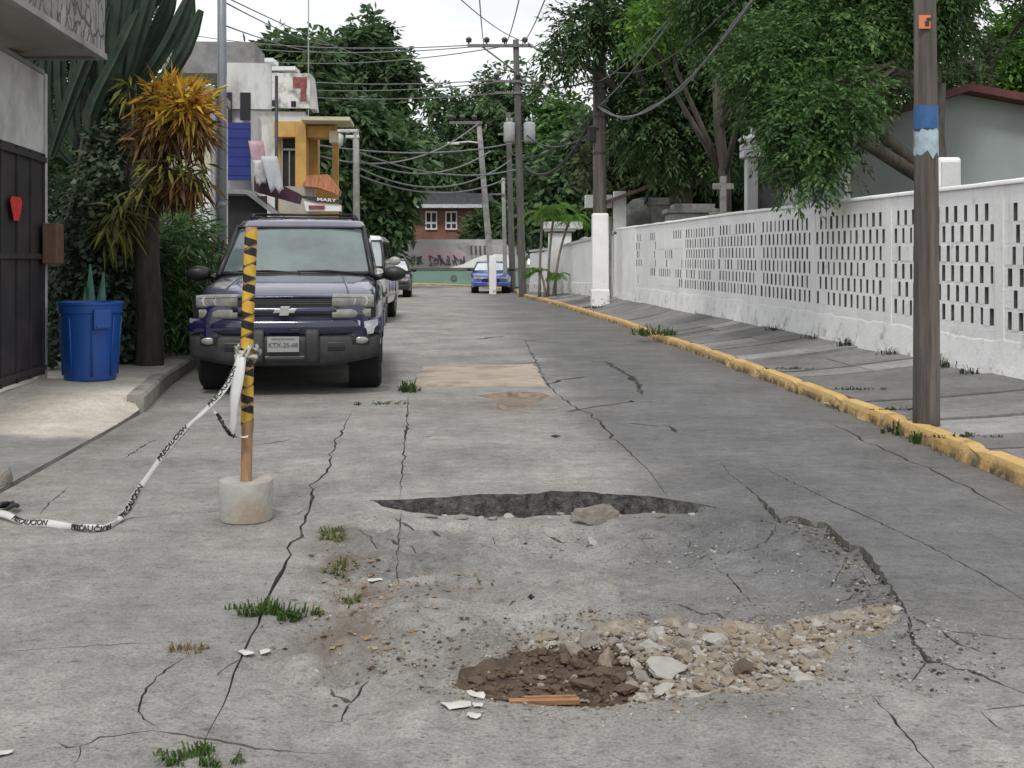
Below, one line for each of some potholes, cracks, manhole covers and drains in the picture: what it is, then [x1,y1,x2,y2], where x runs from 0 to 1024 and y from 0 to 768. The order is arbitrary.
pothole [370,491,720,518]
crack [522,458,1024,729]
crack [547,360,644,413]
pothole [452,603,900,708]
crack [59,414,495,761]
crack [630,423,678,433]
